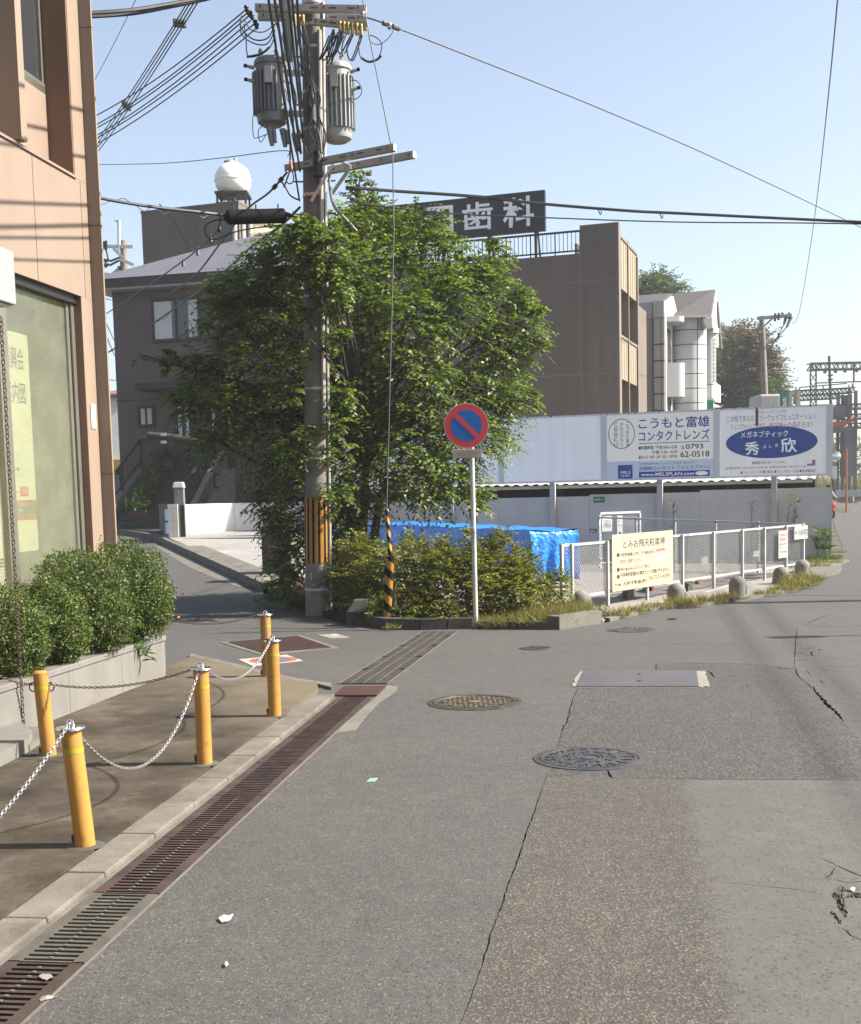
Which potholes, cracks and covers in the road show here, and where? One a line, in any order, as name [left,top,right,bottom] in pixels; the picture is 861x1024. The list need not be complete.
drain grate [93,837,219,895]
manhole cover [428,694,522,711]
manhole cover [534,746,645,772]
drain grate [339,668,407,684]
drain grate [215,763,300,796]
drain grate [289,715,353,737]
drain grate [8,893,158,965]
drain grate [316,697,372,715]
drain grate [382,645,439,657]
drain grate [0,961,83,1024]
crack [727,858,861,940]
drain grate [256,736,329,764]
